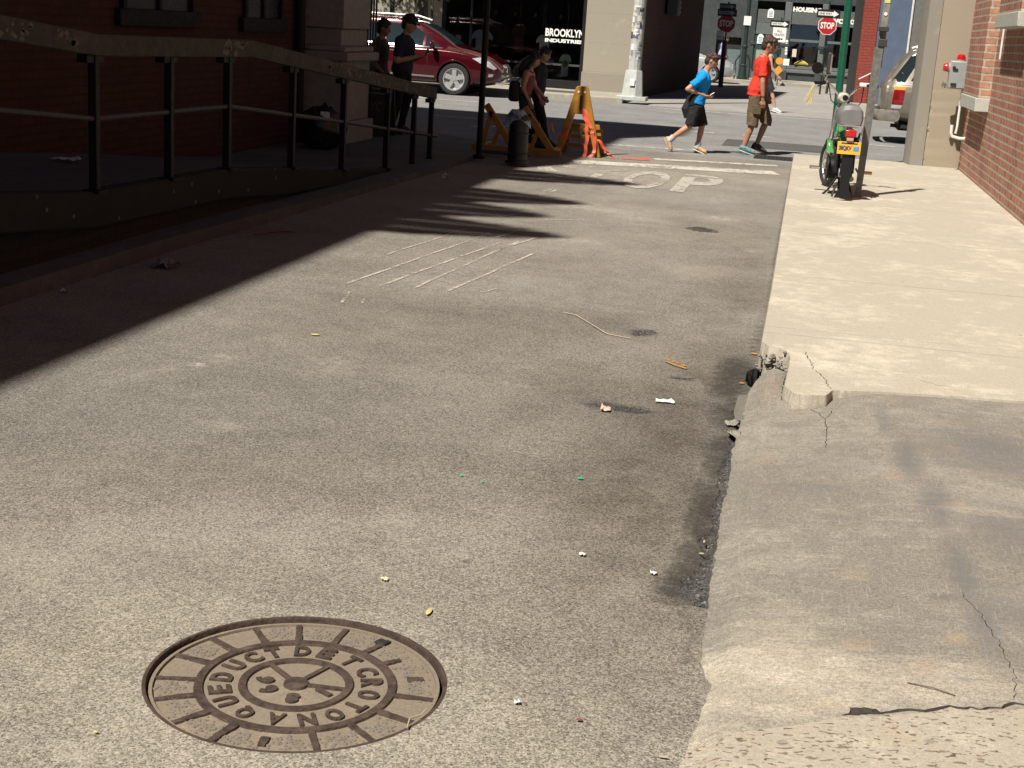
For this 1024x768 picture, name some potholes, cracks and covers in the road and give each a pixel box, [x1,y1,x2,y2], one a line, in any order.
manhole cover [141,616,447,753]
pothole [745,350,787,391]
crack [843,592,1024,716]
